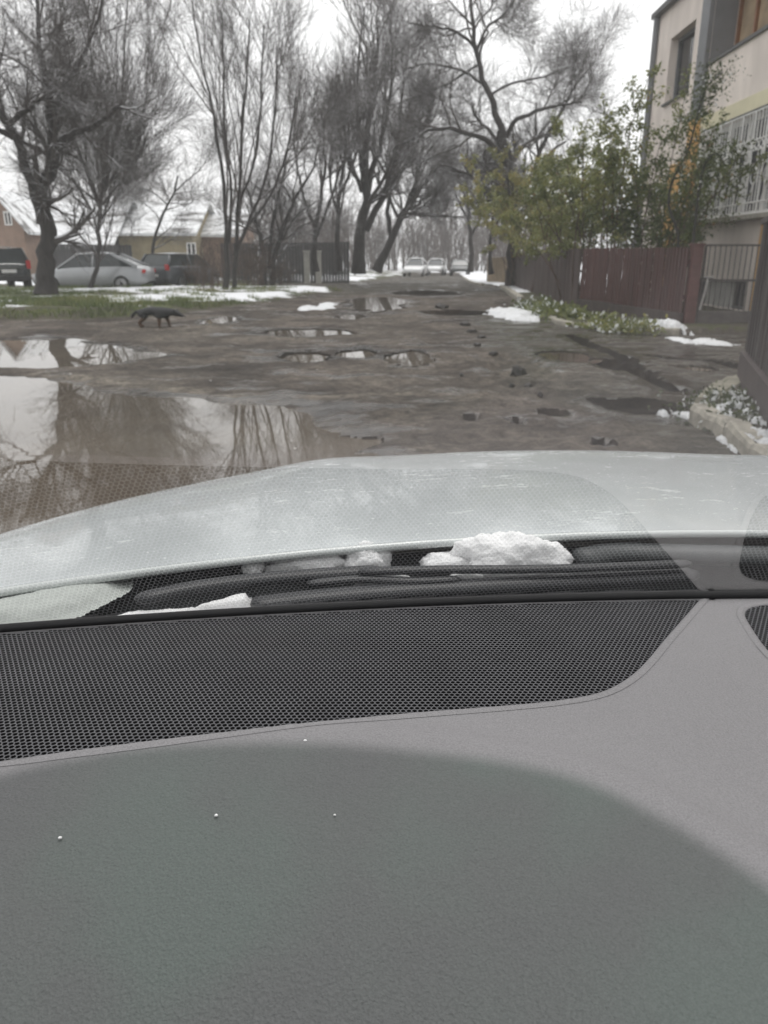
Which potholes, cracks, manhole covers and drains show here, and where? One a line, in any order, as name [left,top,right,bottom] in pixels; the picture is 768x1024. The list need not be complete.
pothole [384,350,443,368]
pothole [530,350,602,364]
pothole [585,397,688,415]
pothole [276,350,331,363]
pothole [252,328,358,338]
pothole [327,349,377,358]
pothole [197,316,242,325]
pothole [341,297,412,313]
